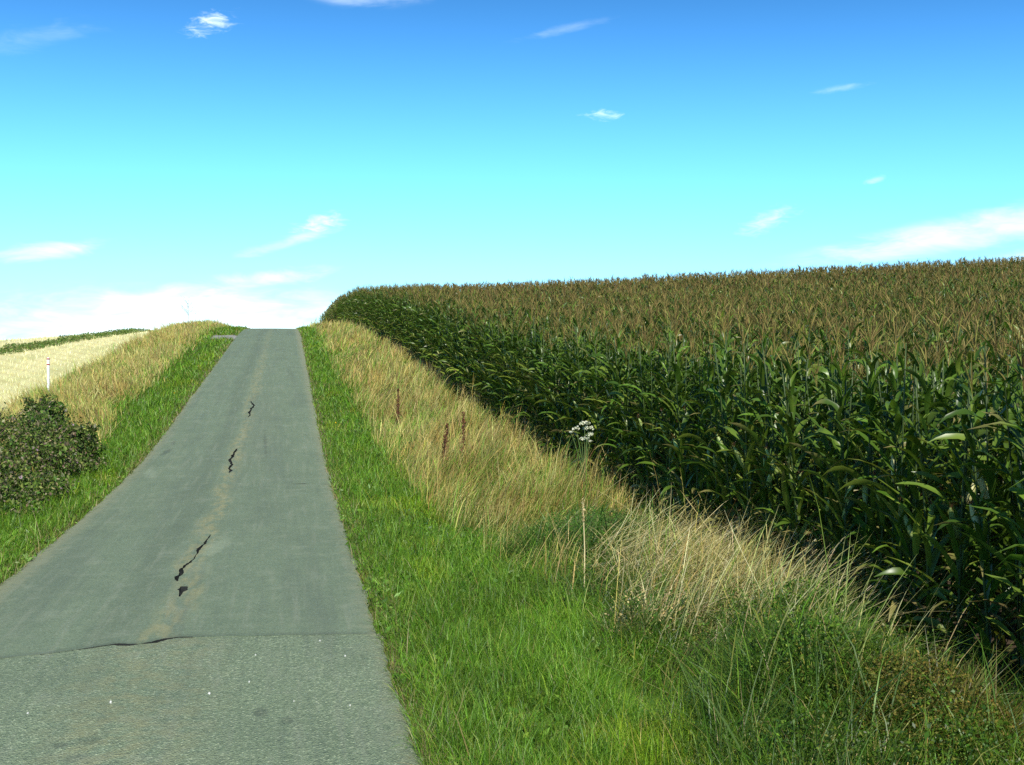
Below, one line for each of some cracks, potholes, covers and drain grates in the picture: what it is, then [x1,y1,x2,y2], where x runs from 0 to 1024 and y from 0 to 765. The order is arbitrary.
crack [174,535,211,581]
crack [228,449,237,473]
